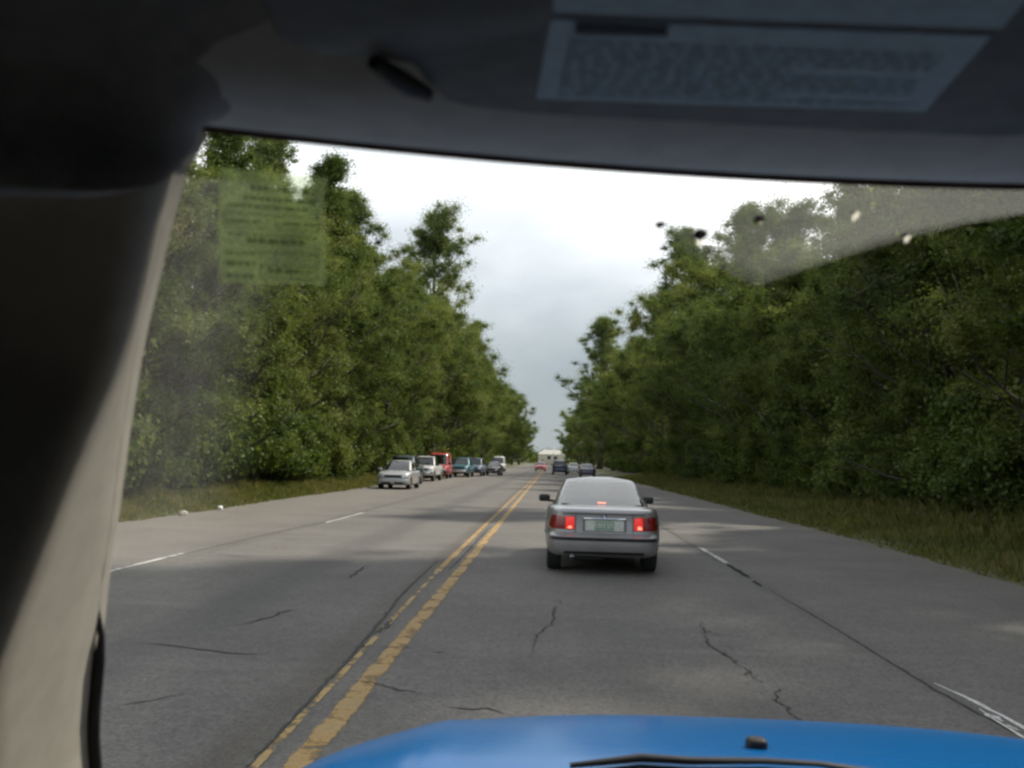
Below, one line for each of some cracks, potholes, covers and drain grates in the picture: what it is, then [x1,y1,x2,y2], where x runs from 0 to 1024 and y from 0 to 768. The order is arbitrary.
crack [136,526,502,768]
crack [532,598,561,652]
crack [699,622,803,721]
